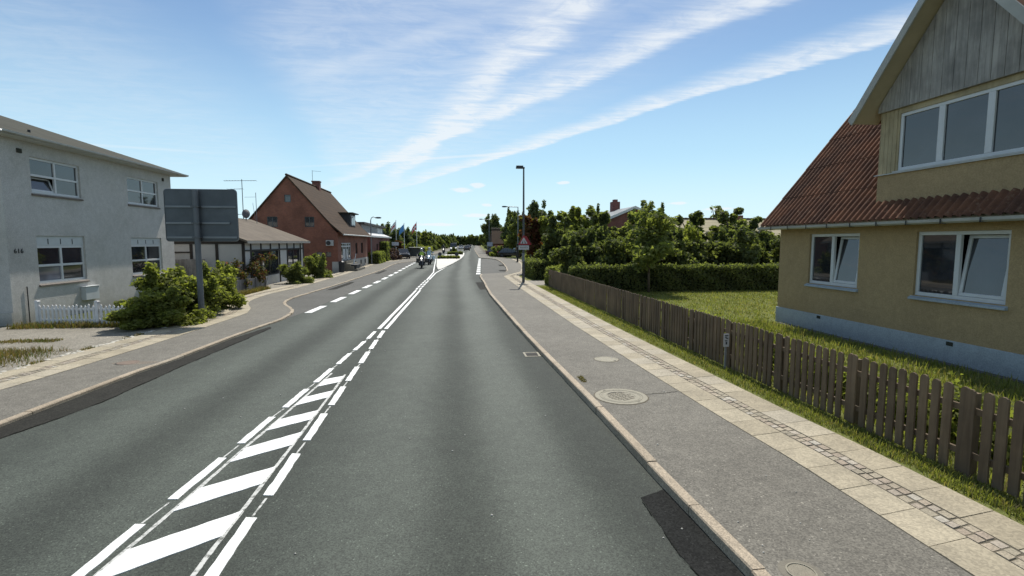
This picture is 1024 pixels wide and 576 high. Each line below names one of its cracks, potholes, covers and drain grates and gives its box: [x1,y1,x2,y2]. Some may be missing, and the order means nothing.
manhole cover [777,559,825,576]
manhole cover [594,389,649,405]
